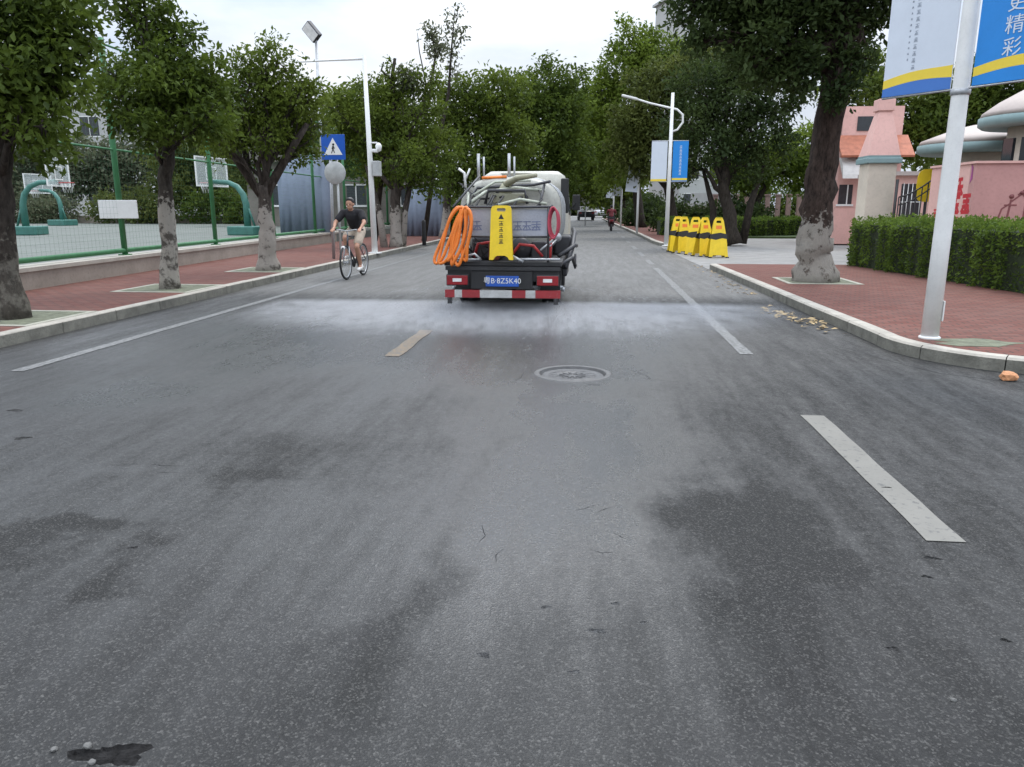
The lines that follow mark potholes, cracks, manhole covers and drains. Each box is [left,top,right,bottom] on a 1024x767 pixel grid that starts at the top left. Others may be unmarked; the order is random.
pothole [67,743,154,766]
manhole cover [534,365,611,382]
